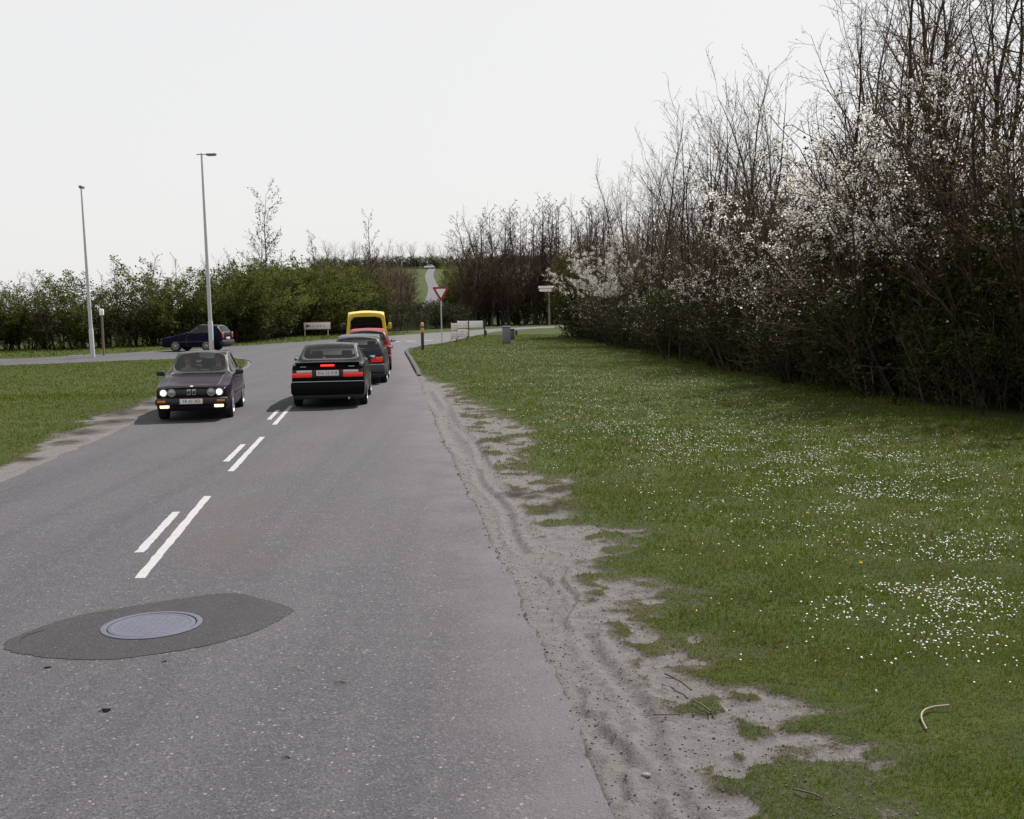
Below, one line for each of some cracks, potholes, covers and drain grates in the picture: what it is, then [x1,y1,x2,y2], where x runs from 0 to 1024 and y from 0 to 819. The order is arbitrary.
manhole cover [100,611,203,640]
